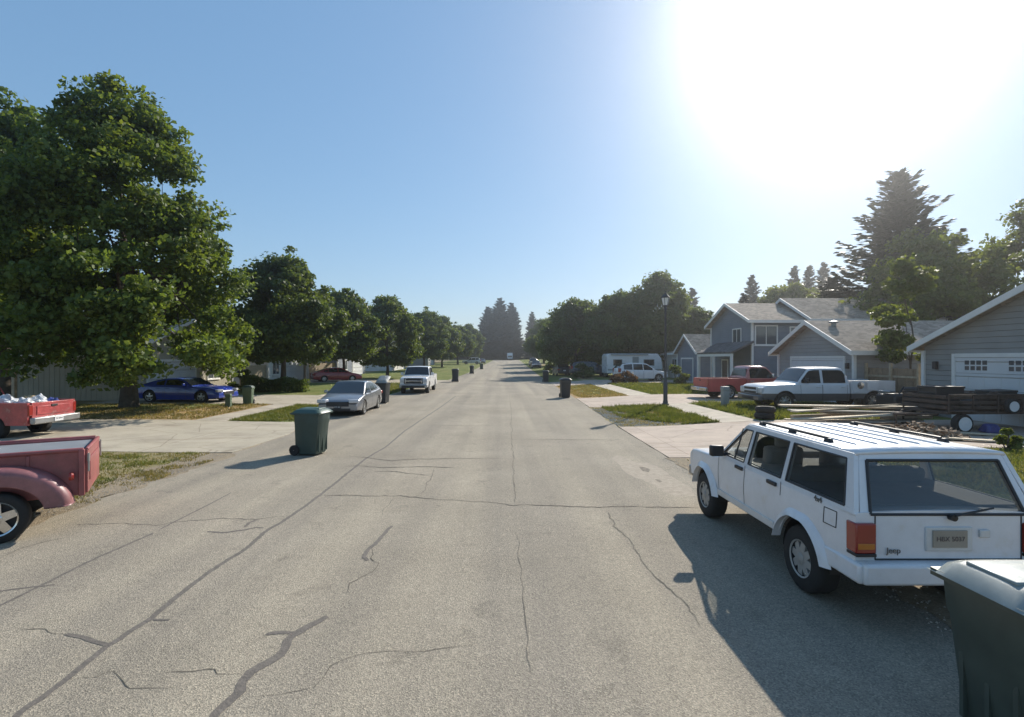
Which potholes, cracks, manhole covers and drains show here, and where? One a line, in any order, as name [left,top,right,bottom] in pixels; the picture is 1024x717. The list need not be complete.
crack [264,645,465,696]
crack [326,457,700,624]
crack [71,669,239,689]
crack [11,516,277,553]
